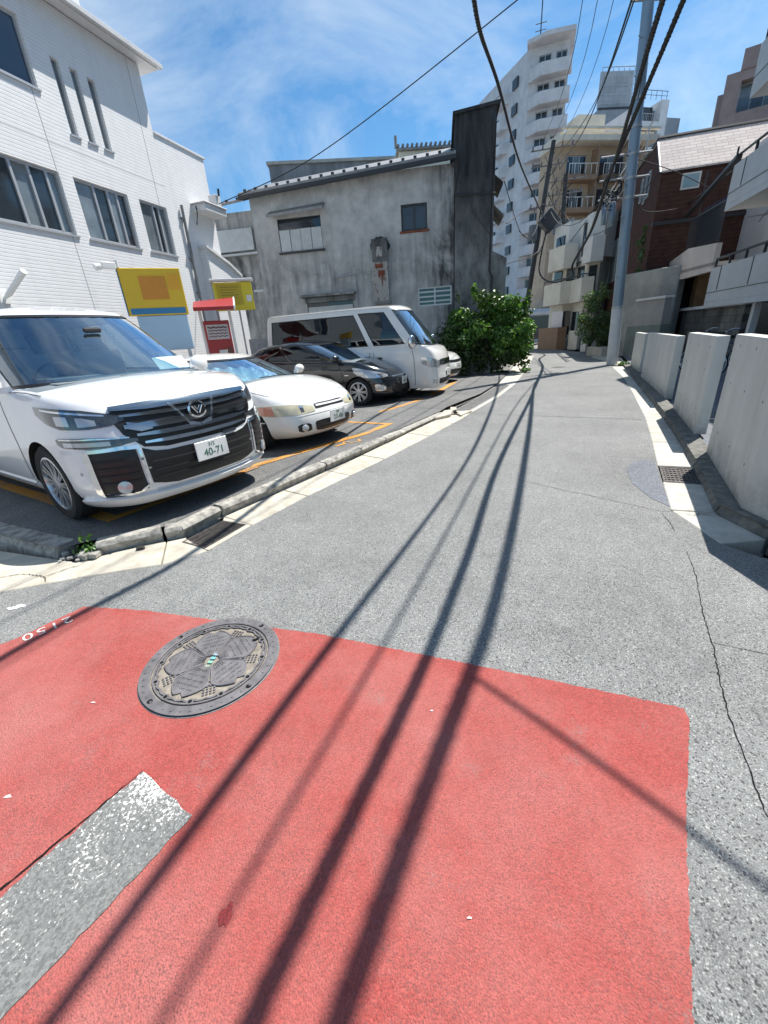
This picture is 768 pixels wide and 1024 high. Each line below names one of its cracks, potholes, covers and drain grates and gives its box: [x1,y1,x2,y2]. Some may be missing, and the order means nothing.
drain grate [182,521,246,549]
manhole cover [137,618,280,719]
crack [687,553,768,816]
drain grate [659,466,701,485]
